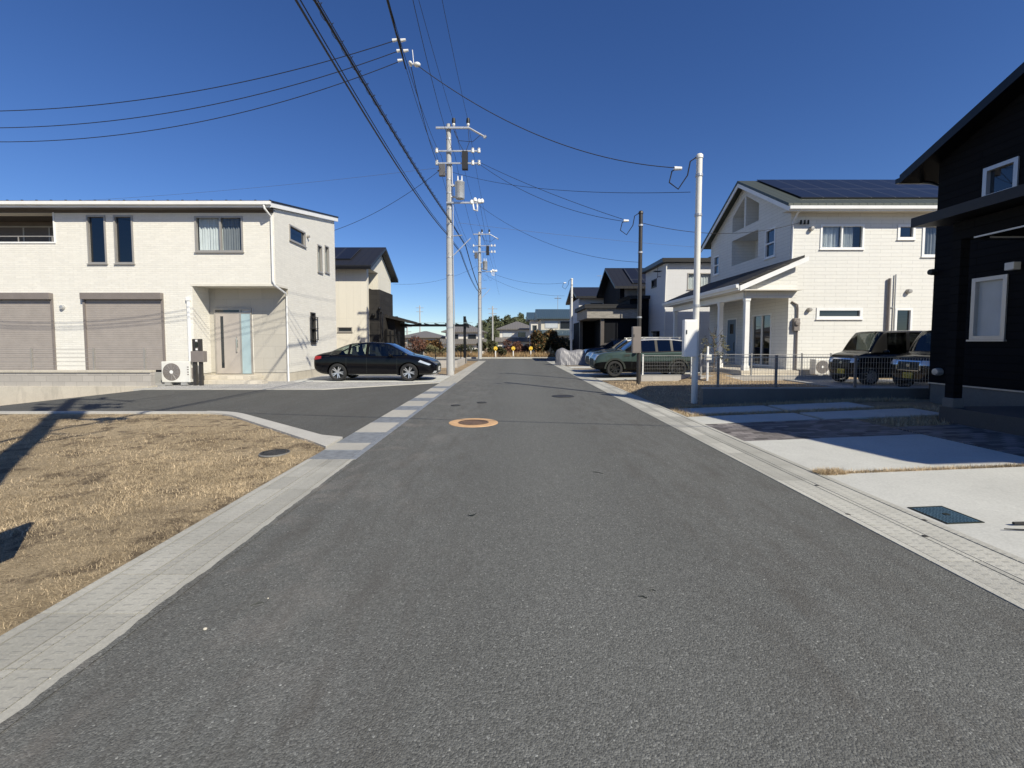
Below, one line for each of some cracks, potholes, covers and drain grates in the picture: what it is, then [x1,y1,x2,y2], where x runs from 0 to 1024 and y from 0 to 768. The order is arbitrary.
utility cover [907,506,985,524]
manhole cover [258,449,290,458]
manhole cover [449,418,498,427]
